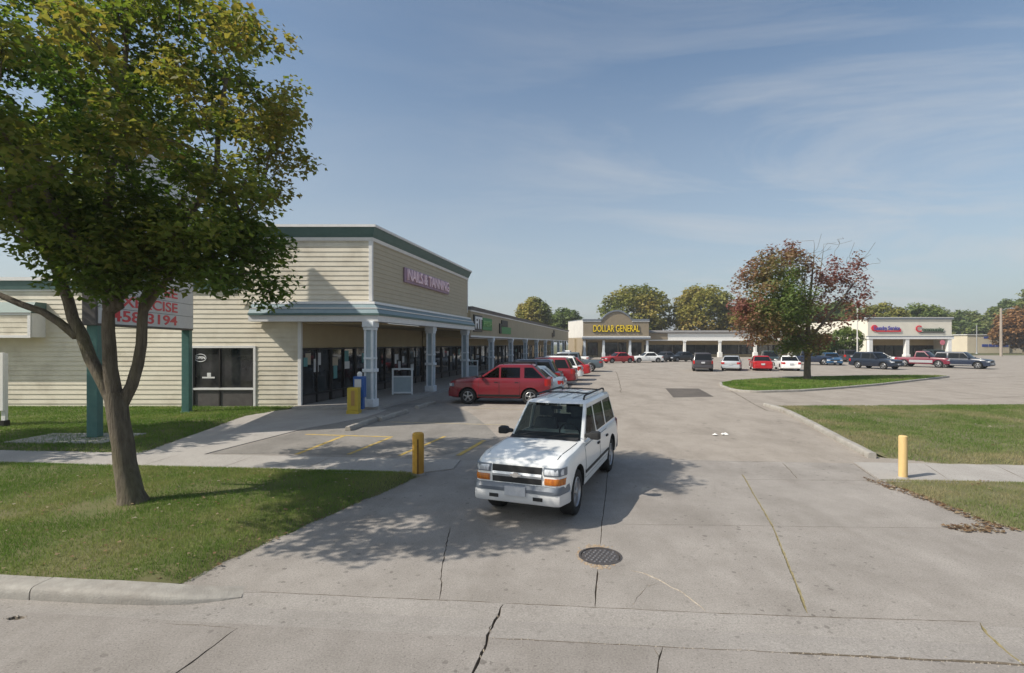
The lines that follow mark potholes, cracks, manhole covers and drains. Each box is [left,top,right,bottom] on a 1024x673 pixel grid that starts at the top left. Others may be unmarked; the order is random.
crack [439,529,450,599]
crack [631,570,705,611]
crack [472,605,1024,673]
manhole cover [576,544,622,569]
crack [165,623,236,673]
